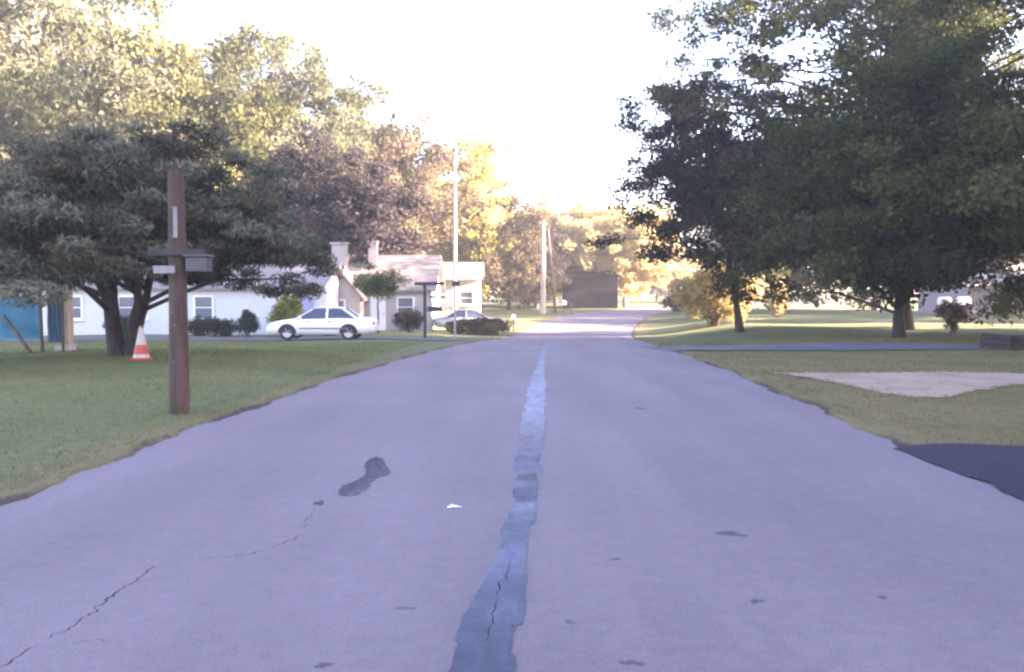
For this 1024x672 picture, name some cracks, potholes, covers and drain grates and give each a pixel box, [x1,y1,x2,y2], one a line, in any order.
crack [0,509,316,667]
crack [486,561,547,640]
